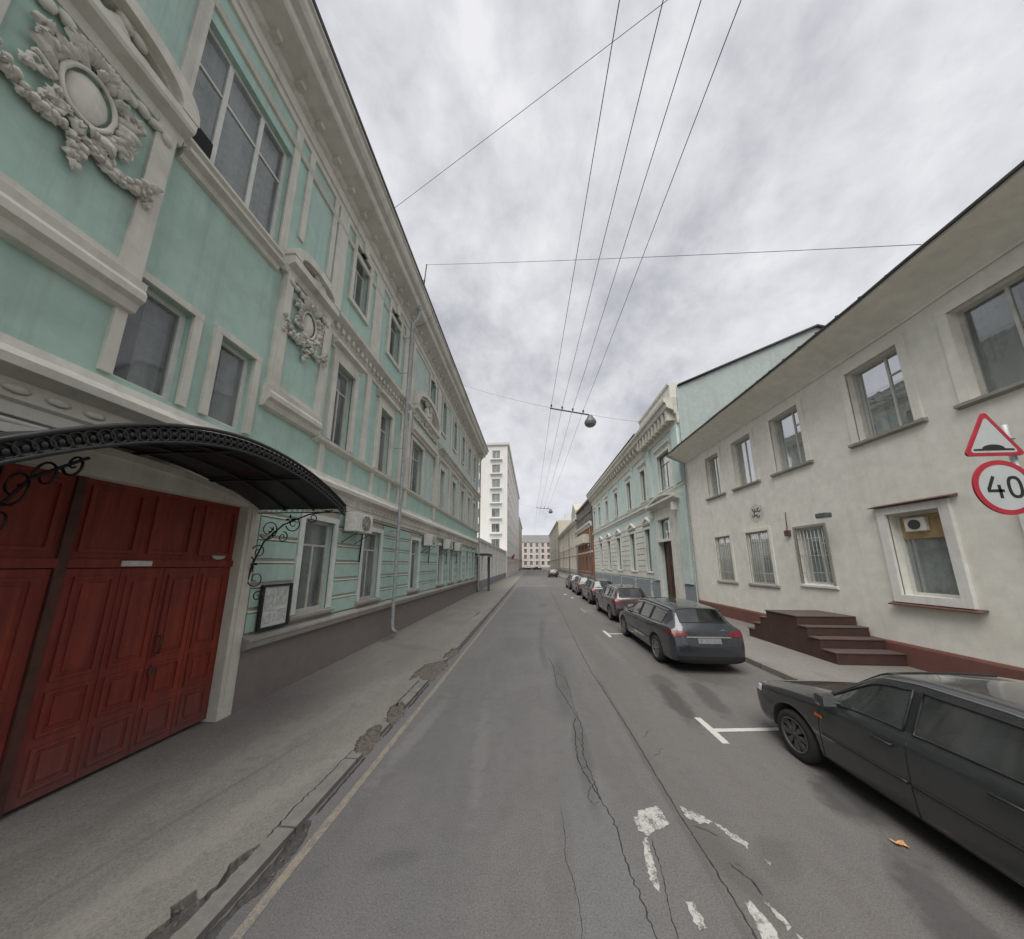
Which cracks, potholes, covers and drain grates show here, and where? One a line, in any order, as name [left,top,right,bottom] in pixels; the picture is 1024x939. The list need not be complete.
crack [549,659,679,939]
pothole [152,854,251,939]
pothole [205,821,312,939]
pothole [411,662,448,683]
pothole [355,727,382,757]
crack [695,826,763,896]
pothole [387,704,406,726]
